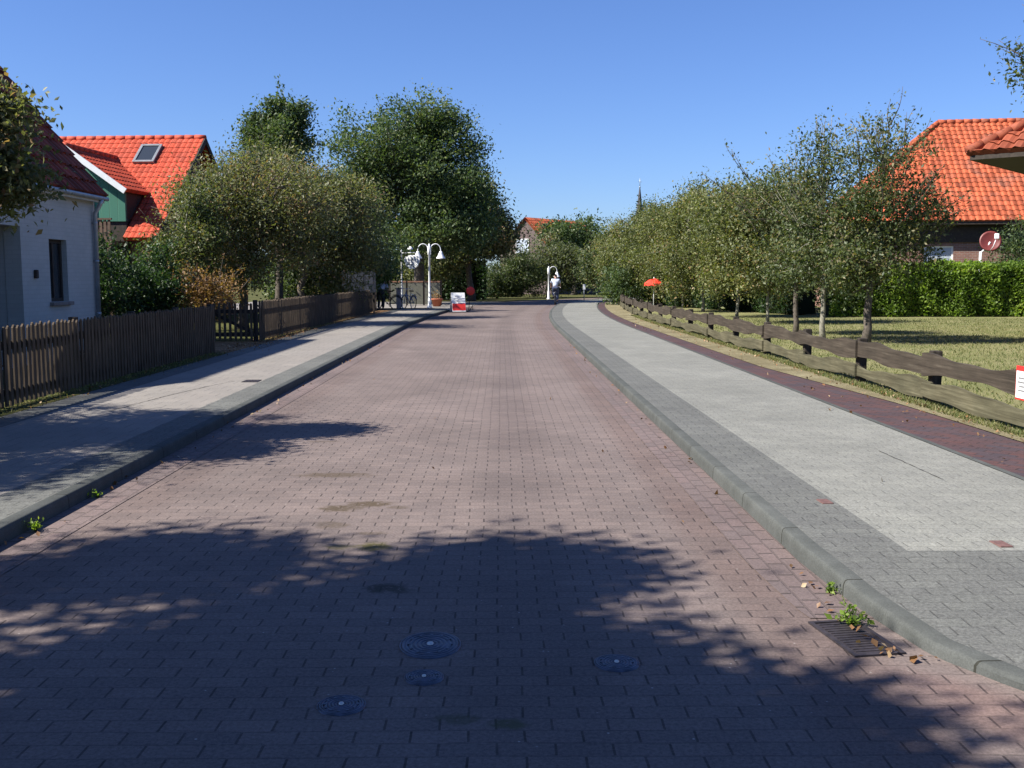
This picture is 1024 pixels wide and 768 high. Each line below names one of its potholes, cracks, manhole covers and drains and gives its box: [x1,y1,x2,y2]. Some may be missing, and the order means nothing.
manhole cover [404,669,444,686]
manhole cover [316,695,366,716]
manhole cover [399,631,461,659]
manhole cover [594,654,640,672]
